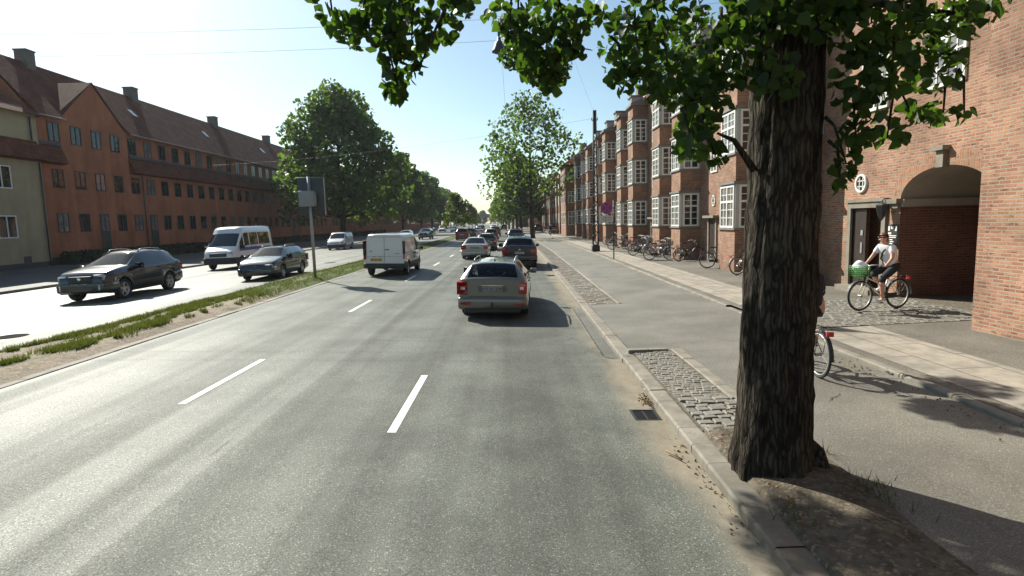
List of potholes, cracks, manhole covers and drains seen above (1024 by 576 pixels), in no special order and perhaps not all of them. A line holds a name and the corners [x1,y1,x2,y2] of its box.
drain grate [629,409,662,420]
